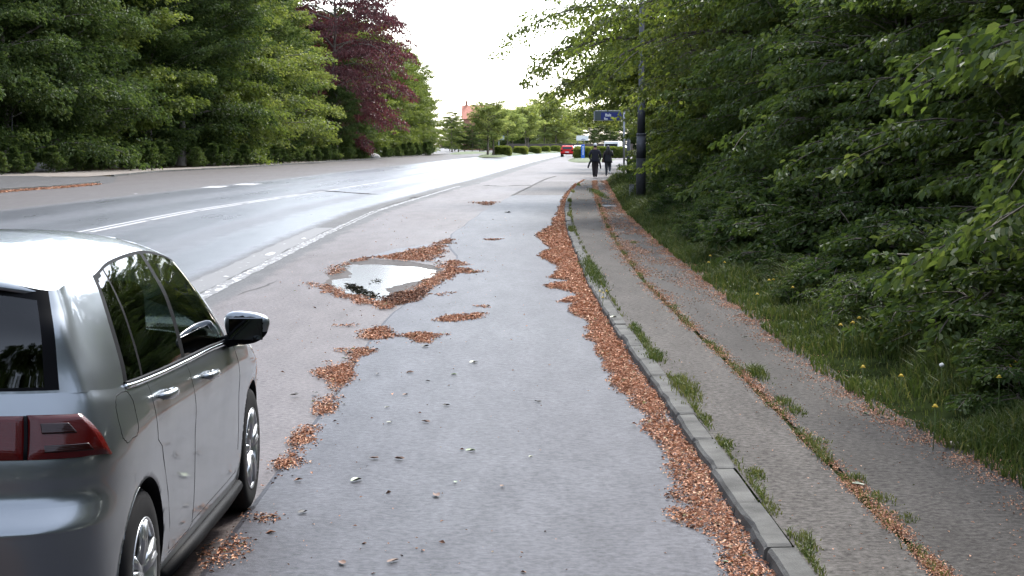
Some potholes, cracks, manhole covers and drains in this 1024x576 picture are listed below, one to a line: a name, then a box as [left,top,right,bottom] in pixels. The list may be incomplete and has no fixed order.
pothole [322,259,443,305]
